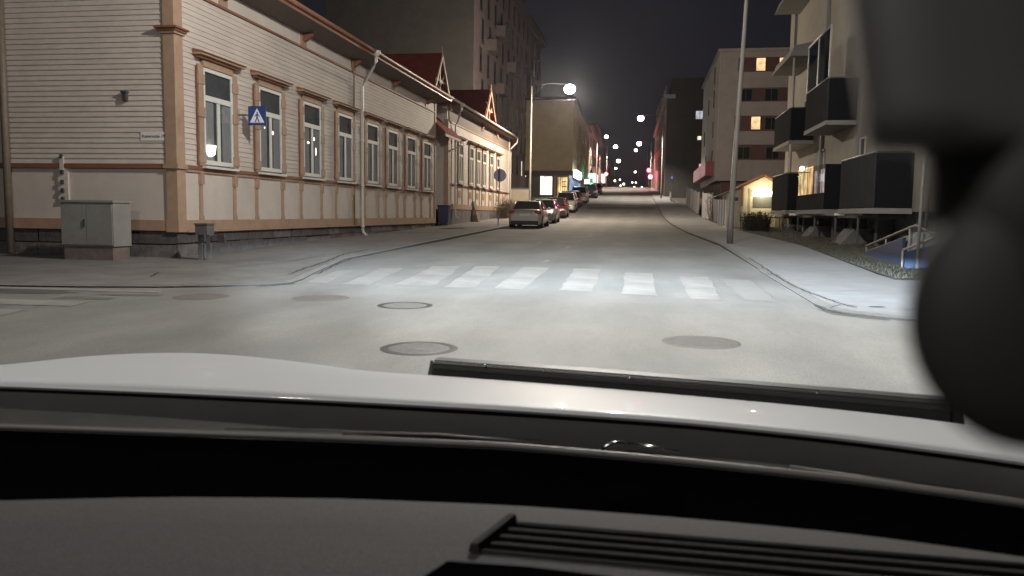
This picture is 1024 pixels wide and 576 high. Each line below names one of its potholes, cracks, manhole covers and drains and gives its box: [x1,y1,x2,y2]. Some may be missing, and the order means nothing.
manhole cover [662,336,741,349]
manhole cover [380,342,458,356]
